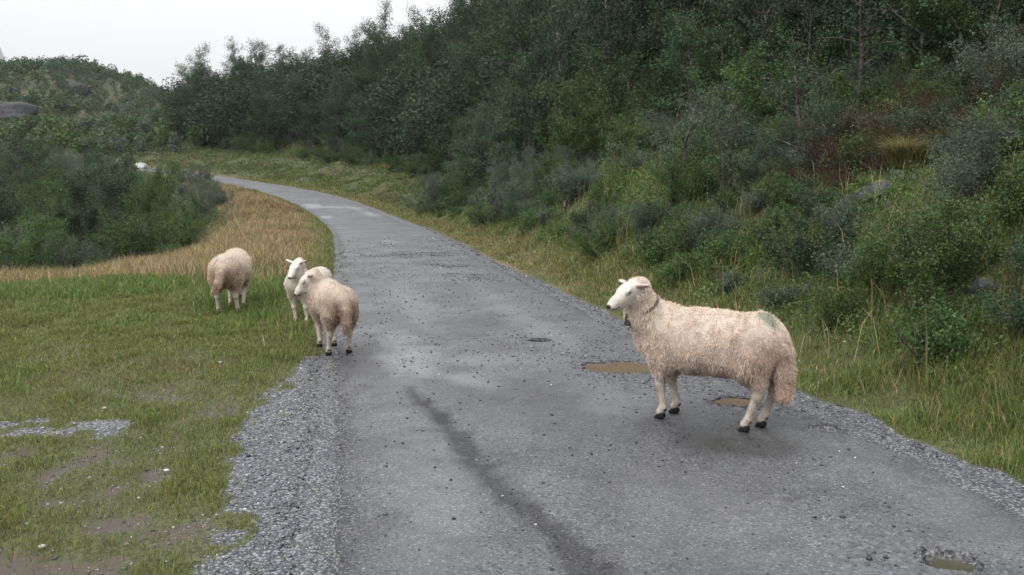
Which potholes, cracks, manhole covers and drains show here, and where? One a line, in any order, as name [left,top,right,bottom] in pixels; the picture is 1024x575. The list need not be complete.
pothole [913,544,992,575]
pothole [571,359,652,375]
pothole [703,394,764,408]
